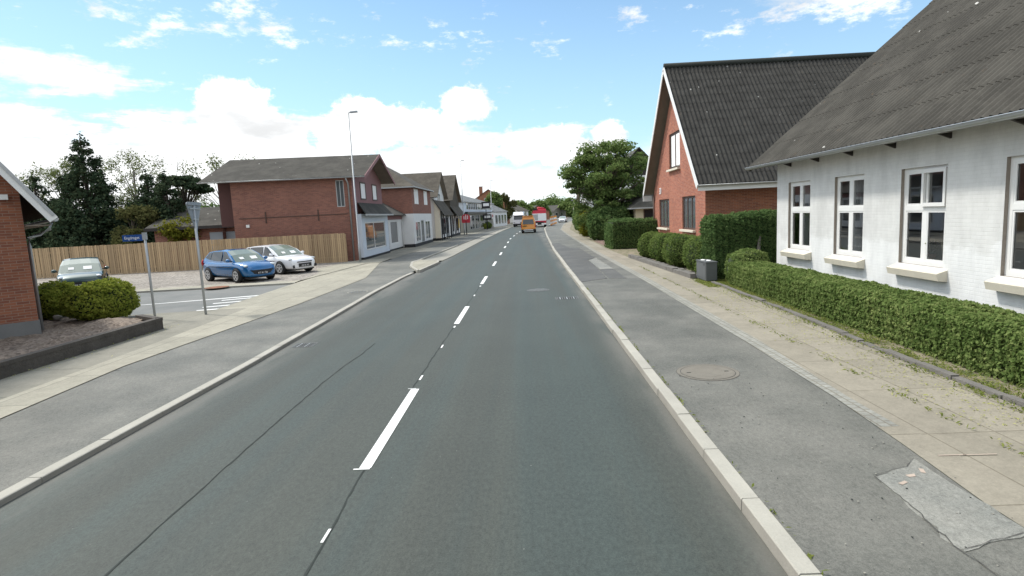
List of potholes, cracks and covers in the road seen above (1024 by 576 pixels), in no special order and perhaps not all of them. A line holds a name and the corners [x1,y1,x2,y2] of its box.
manhole cover [676,364,740,381]
